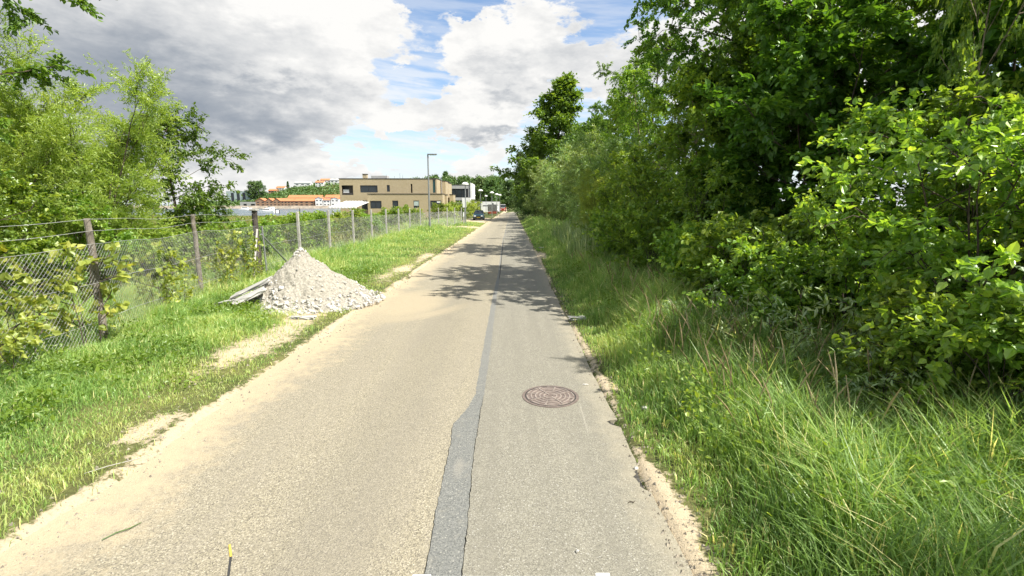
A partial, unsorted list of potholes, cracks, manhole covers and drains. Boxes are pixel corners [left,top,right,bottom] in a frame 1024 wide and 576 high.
manhole cover [522,385,579,408]
